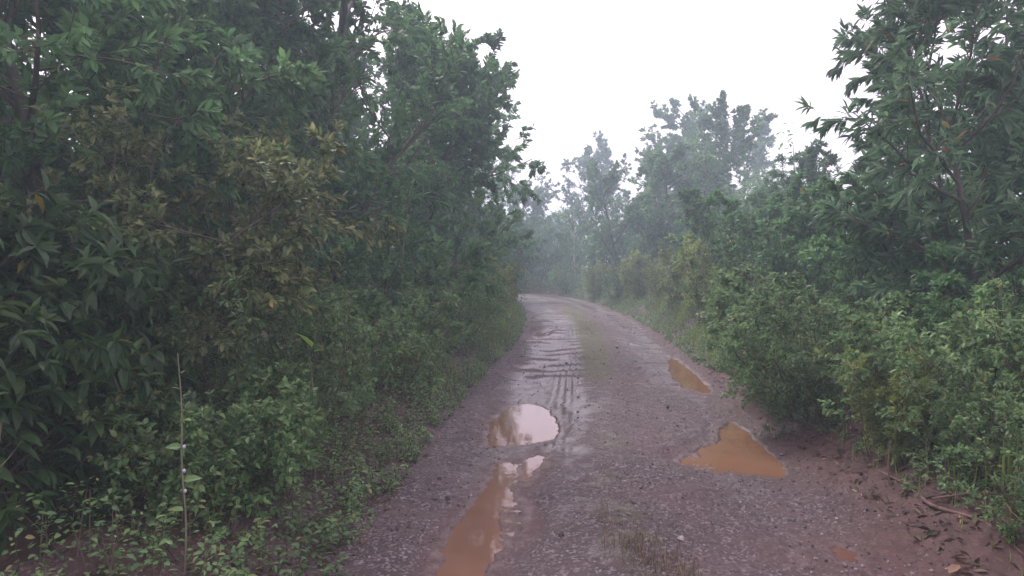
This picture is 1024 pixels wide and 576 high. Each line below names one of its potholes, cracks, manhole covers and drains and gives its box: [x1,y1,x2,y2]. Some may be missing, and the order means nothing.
pothole [423,459,534,576]
pothole [480,401,564,449]
pothole [665,357,717,395]
pothole [672,420,797,479]
